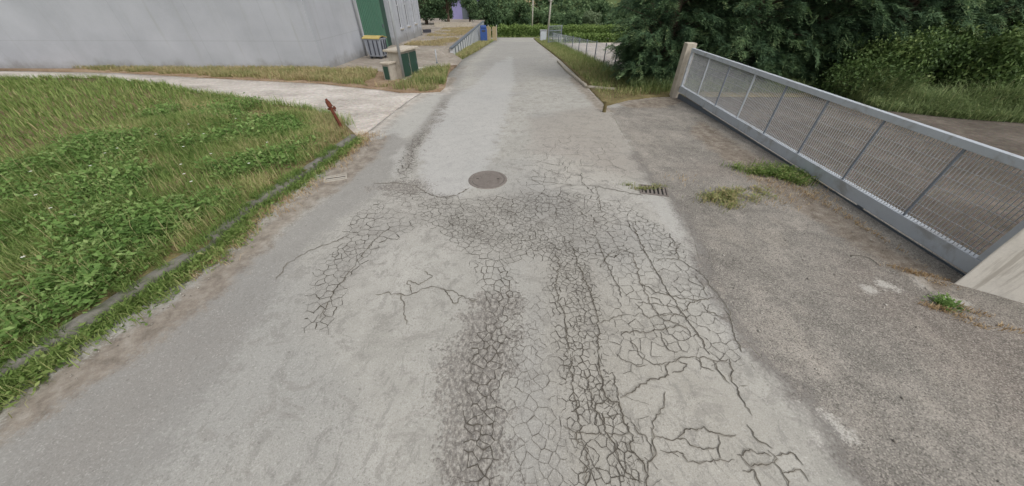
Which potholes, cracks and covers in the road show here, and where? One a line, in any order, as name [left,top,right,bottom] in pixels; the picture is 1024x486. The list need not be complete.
crack [391,136,809,486]
crack [375,271,477,324]
crack [276,202,418,335]
manhole cover [468,171,507,189]
drain grate [639,184,669,197]
drain grate [323,173,347,183]
